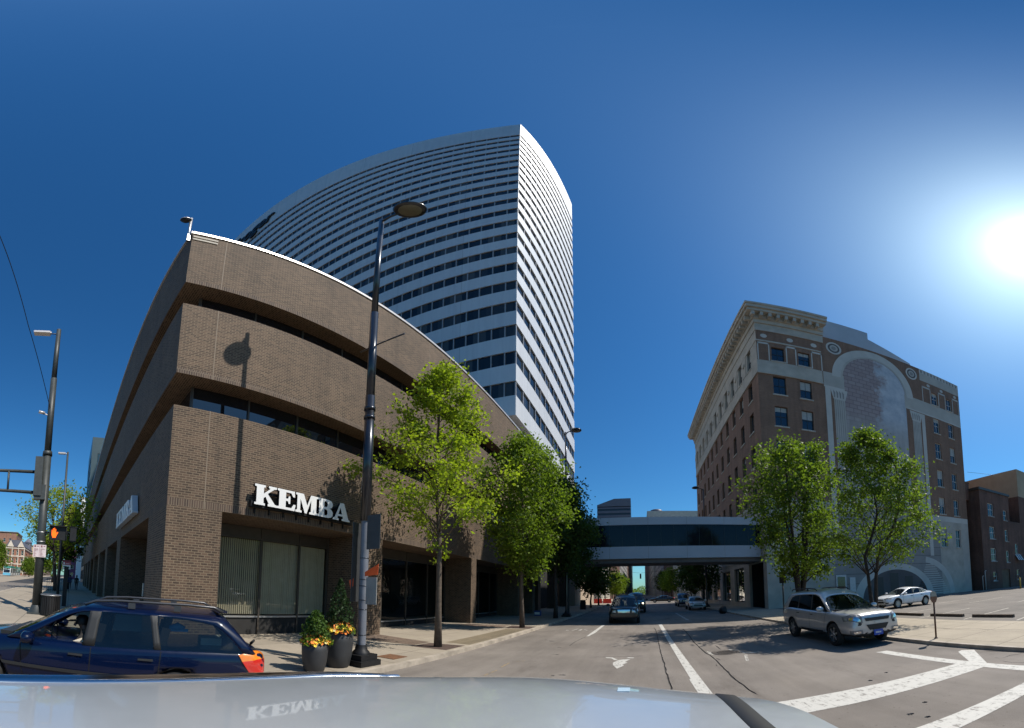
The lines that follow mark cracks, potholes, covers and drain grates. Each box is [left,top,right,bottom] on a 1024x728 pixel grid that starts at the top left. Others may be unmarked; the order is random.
crack [654,628,758,695]
